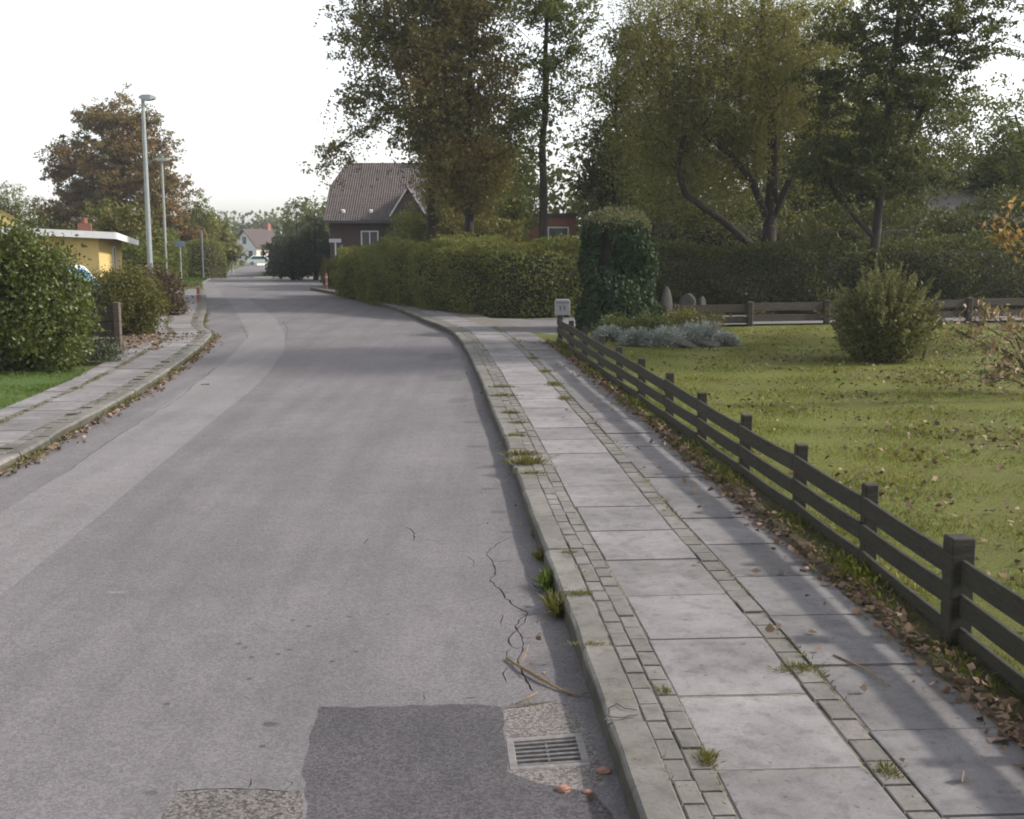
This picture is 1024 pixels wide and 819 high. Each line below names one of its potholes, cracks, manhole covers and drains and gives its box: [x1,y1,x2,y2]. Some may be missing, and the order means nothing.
drain grate [506,733,591,770]
crack [465,537,556,708]
